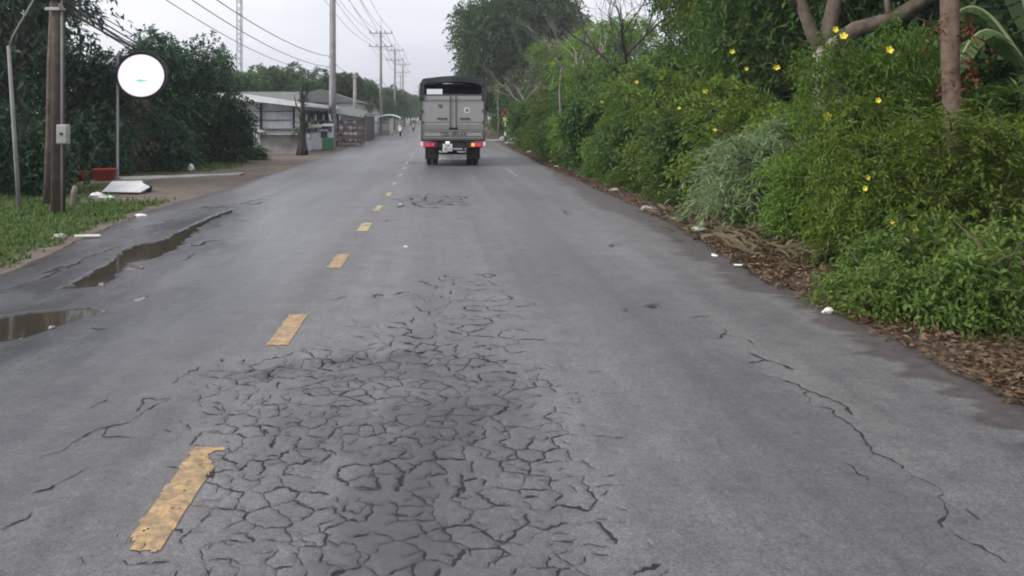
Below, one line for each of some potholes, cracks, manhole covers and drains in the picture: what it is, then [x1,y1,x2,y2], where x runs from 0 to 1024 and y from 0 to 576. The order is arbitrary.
crack [720,328,1005,562]
pothole [61,210,233,289]
crack [381,194,469,222]
crack [42,367,199,457]
crack [353,273,602,405]
crack [32,467,88,493]
pothole [0,307,103,342]
